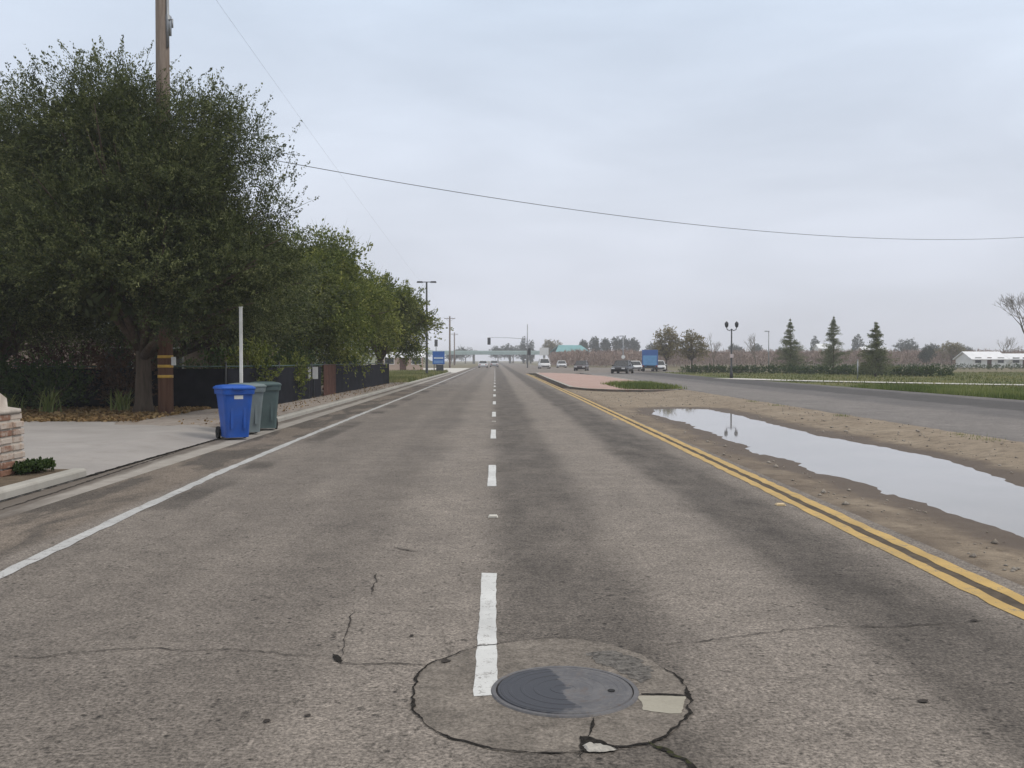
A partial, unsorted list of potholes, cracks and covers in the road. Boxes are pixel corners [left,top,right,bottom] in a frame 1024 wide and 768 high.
crack [658,620,988,645]
crack [338,574,600,759]
manhole cover [491,666,639,718]
crack [0,647,309,659]
